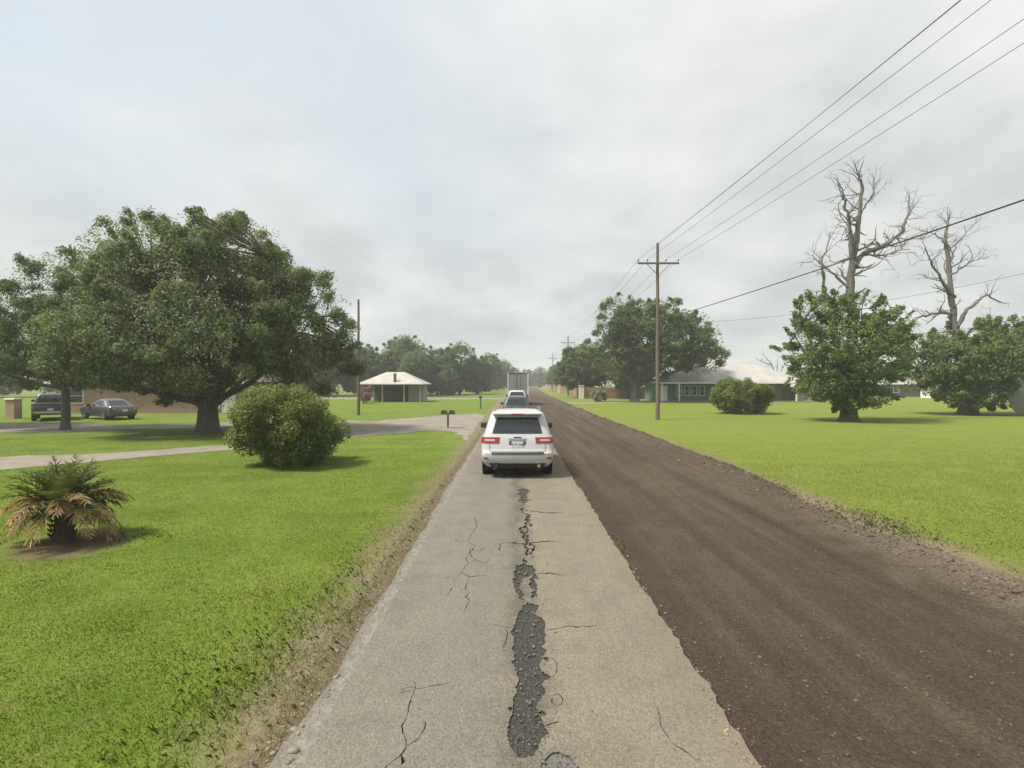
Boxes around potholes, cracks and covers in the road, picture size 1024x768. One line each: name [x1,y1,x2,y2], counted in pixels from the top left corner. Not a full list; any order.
crack [385,682,448,768]
crack [546,657,563,726]
crack [445,504,566,609]
crack [654,704,701,762]
pothole [507,602,551,758]
pothole [541,751,579,768]
pothole [512,562,539,600]
